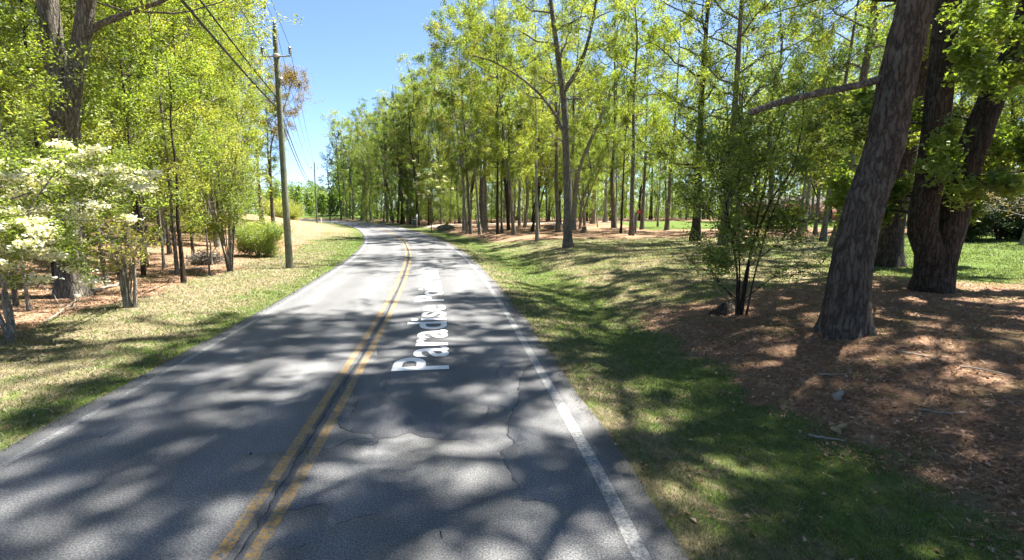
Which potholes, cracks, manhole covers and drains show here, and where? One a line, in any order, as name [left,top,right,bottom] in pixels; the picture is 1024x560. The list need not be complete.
crack [338,391,453,446]
crack [497,363,536,500]
